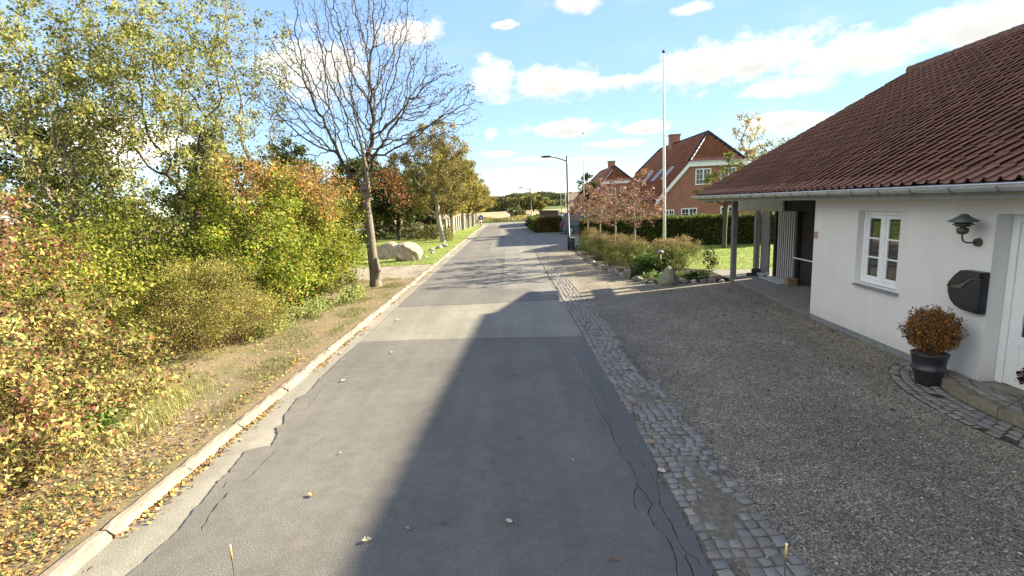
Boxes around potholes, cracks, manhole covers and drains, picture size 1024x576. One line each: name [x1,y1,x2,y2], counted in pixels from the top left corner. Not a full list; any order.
crack [201,449,276,530]
crack [564,340,700,576]
